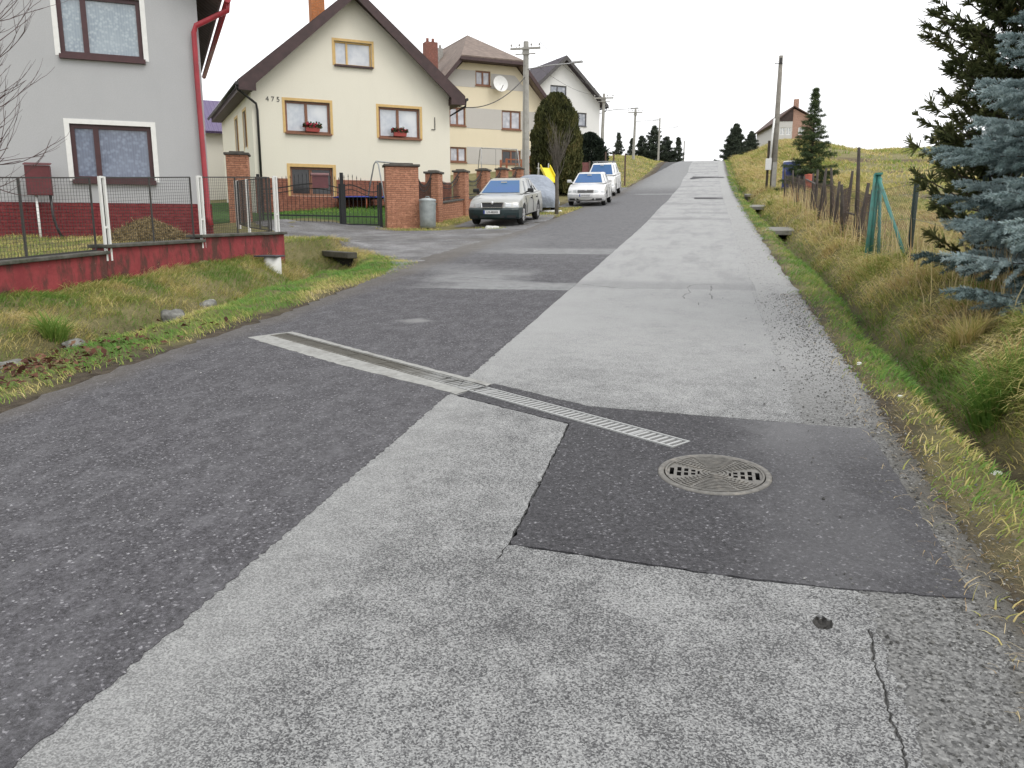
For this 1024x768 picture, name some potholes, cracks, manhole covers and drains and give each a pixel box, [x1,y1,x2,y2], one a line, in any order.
crack [867,629,909,768]
manhole cover [658,454,772,496]
pothole [813,616,833,629]
